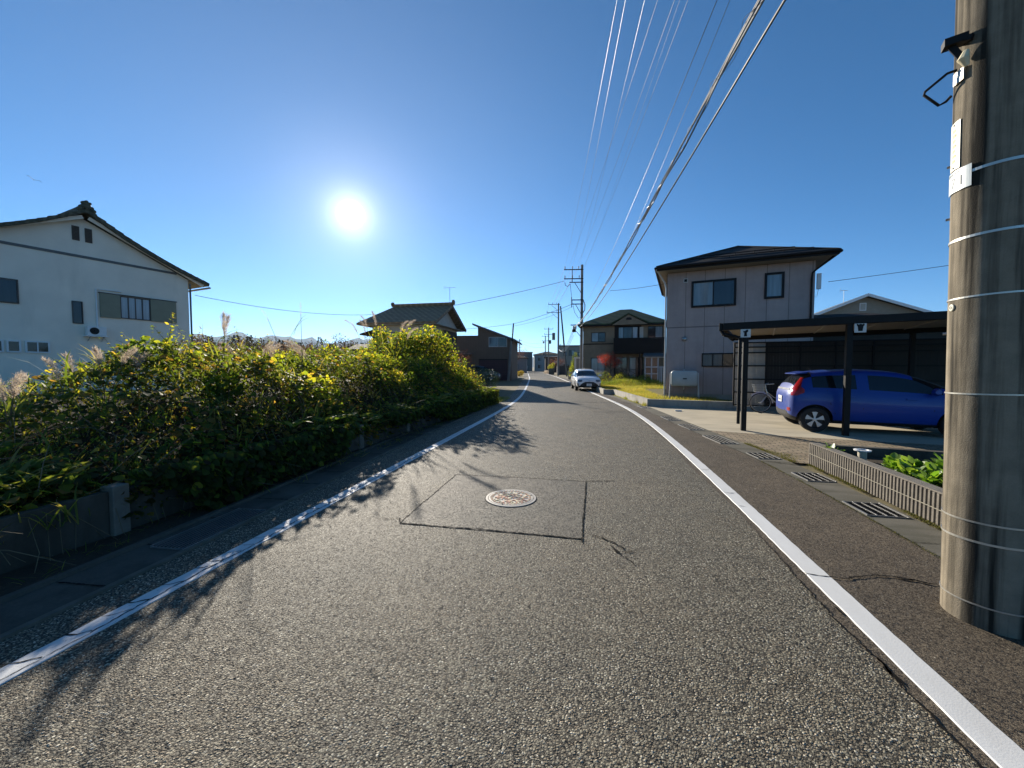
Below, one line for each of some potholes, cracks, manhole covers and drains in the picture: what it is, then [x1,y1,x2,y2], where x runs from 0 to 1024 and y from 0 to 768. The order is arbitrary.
drain grate [702,435,739,444]
drain grate [746,452,781,460]
manhole cover [485,489,537,508]
drain grate [842,501,910,519]
drain grate [791,472,837,483]
crack [795,570,938,585]
drain grate [150,508,265,550]
crack [593,535,638,566]
